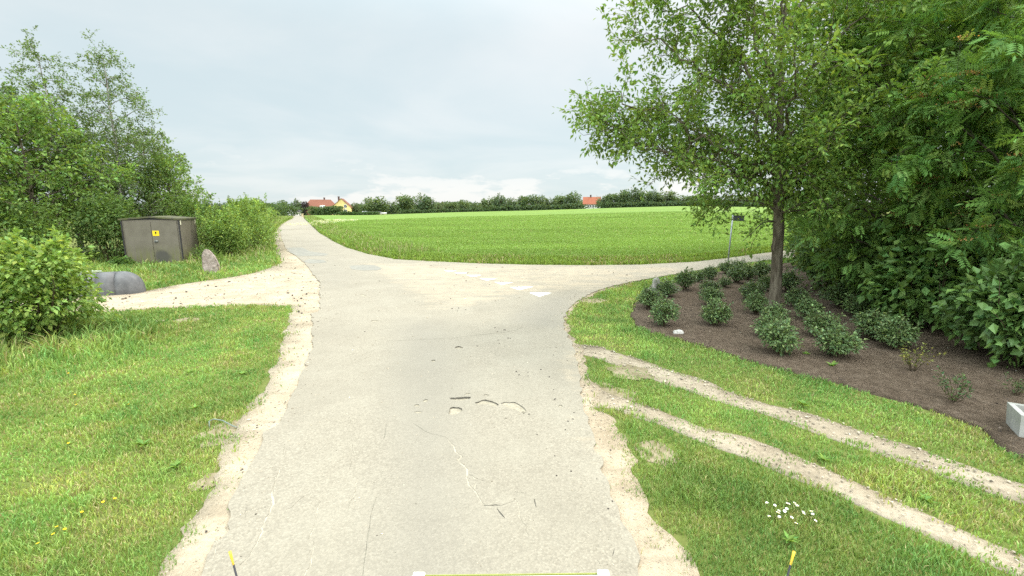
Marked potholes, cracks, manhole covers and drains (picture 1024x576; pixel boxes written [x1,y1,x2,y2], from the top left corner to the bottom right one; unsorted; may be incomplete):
pothole [501,402,526,414]
crack [348,445,376,576]
crack [413,423,536,534]
